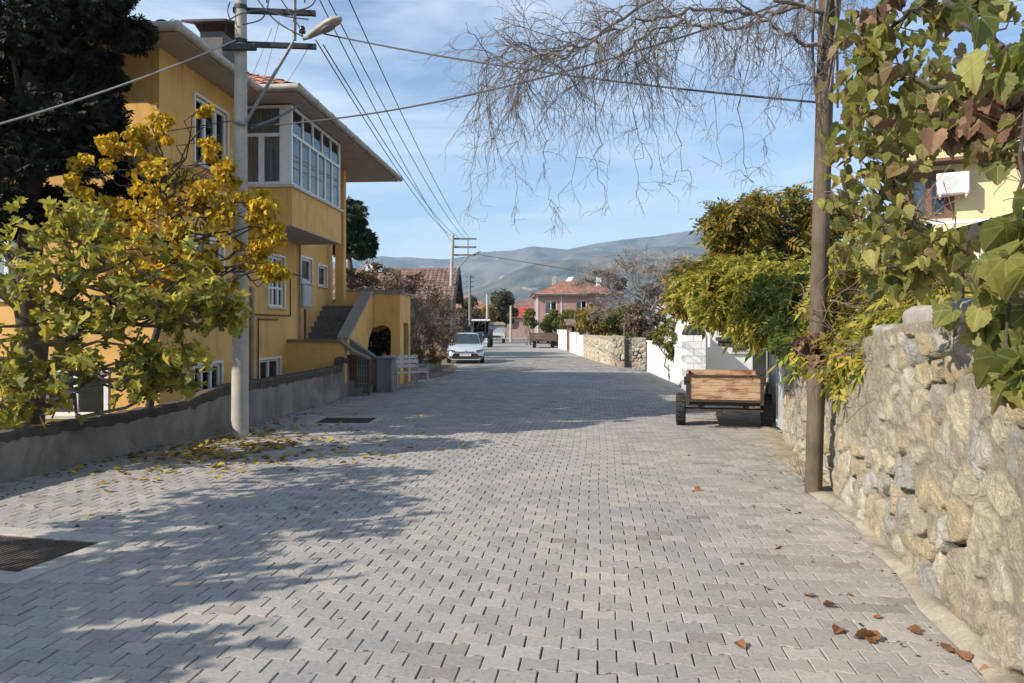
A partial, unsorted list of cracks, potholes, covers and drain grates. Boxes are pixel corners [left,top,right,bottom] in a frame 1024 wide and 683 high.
drain grate [0,526,140,584]
drain grate [303,416,386,425]
